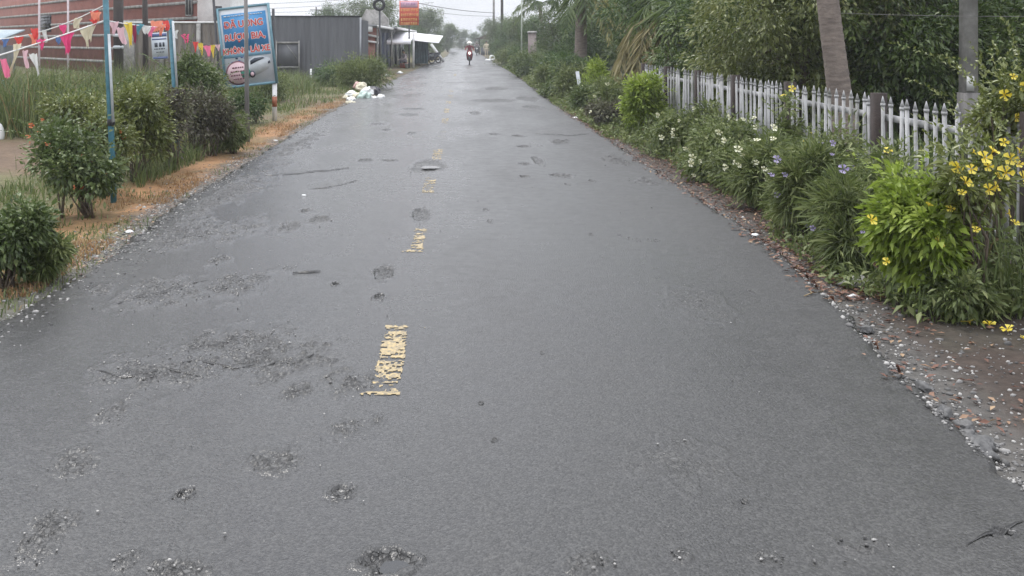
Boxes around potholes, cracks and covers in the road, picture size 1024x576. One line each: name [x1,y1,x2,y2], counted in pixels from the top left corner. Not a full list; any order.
crack [967,520,1024,544]
crack [275,167,356,189]
pothole [408,205,434,224]
pothole [402,157,449,178]
pothole [346,543,427,576]
pothole [367,262,401,283]
pothole [172,488,197,500]
pothole [322,483,358,502]
